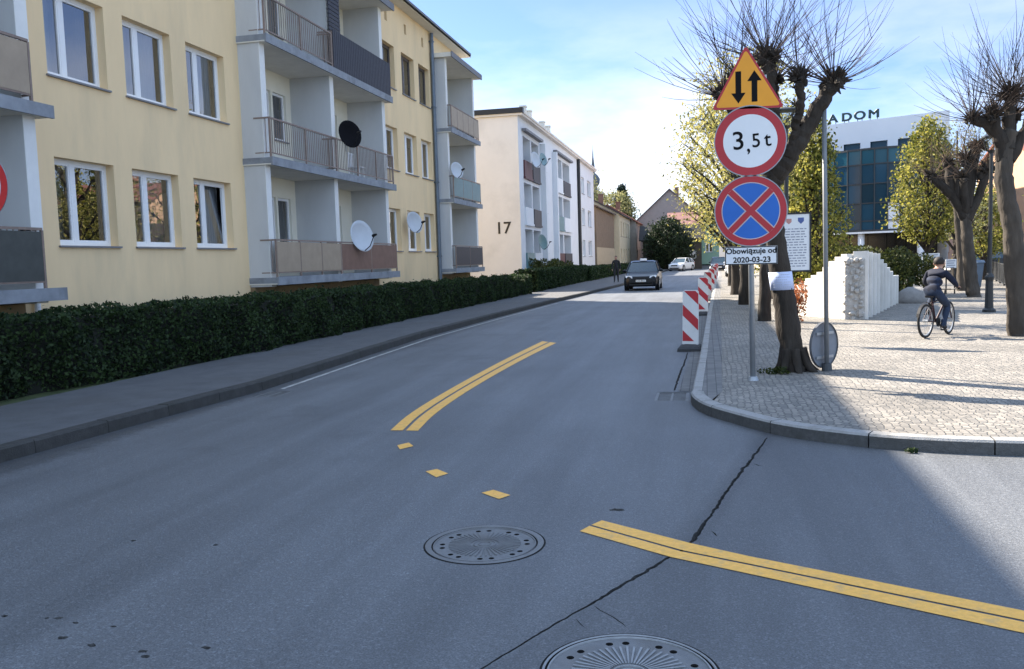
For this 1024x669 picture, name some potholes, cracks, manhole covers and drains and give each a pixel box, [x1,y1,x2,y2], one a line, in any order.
crack [480,438,767,669]
manhole cover [423,525,546,565]
manhole cover [539,634,720,669]
